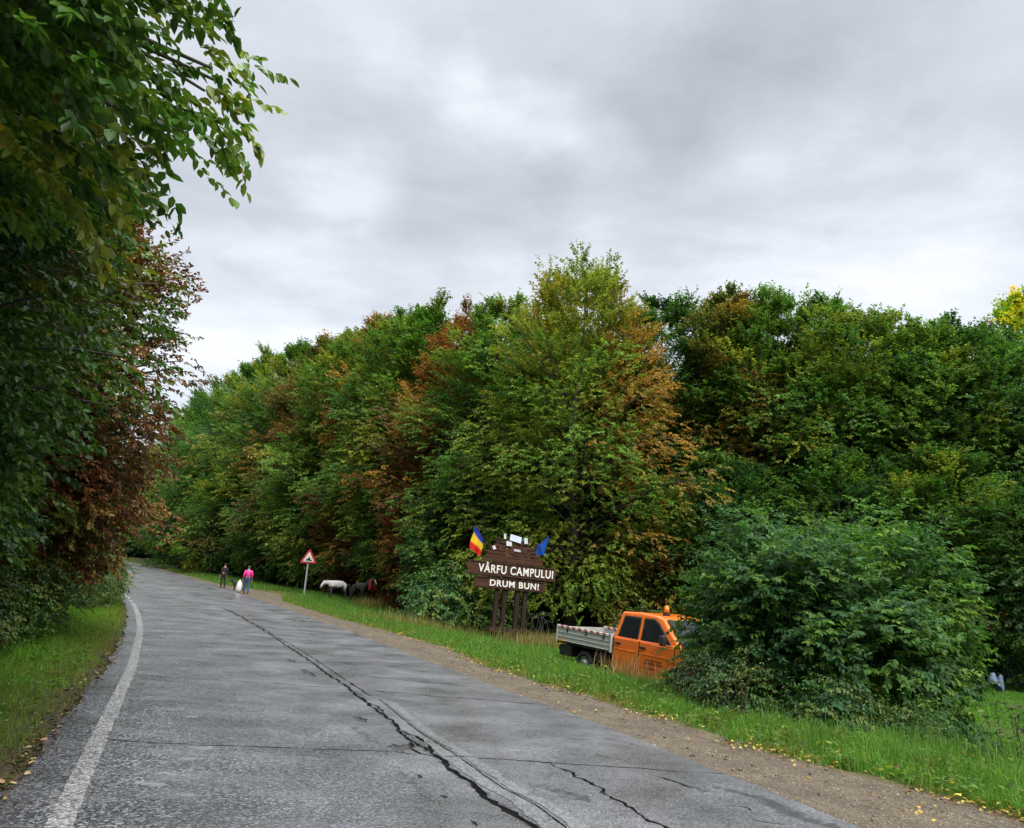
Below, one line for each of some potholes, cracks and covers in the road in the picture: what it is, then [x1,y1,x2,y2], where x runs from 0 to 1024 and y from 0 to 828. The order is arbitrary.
crack [112,609,724,828]
